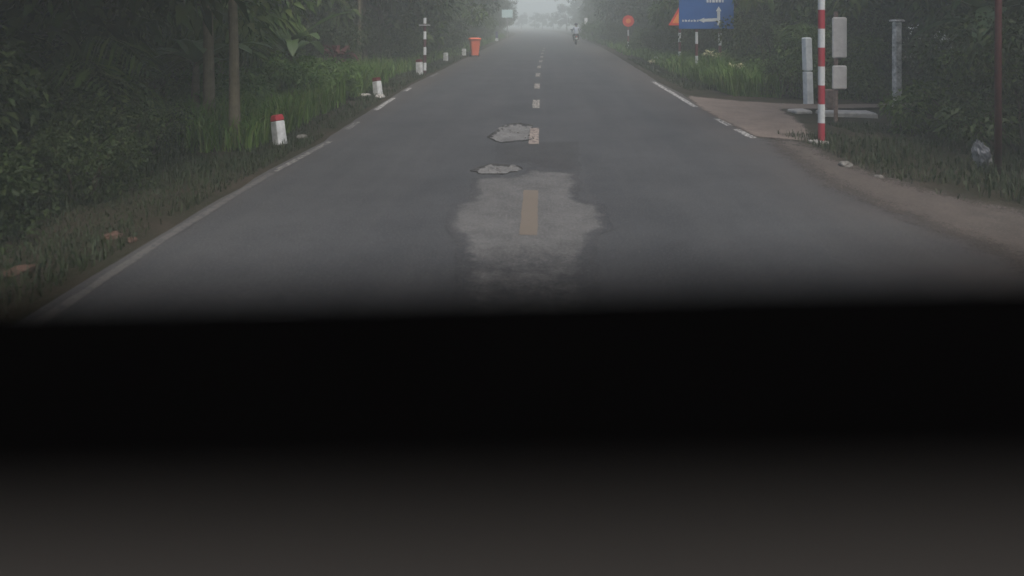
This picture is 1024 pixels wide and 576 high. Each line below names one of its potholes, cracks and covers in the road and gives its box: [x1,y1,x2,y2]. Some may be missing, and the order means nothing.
pothole [487,123,534,143]
pothole [470,164,523,175]
